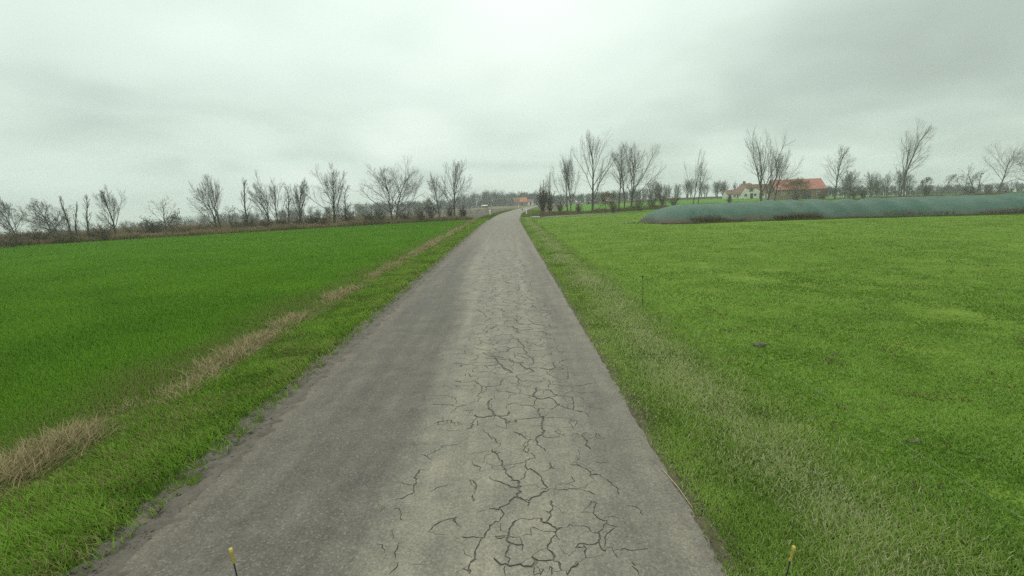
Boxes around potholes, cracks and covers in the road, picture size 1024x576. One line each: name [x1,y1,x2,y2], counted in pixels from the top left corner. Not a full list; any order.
crack [378,450,439,575]
crack [402,249,649,575]
